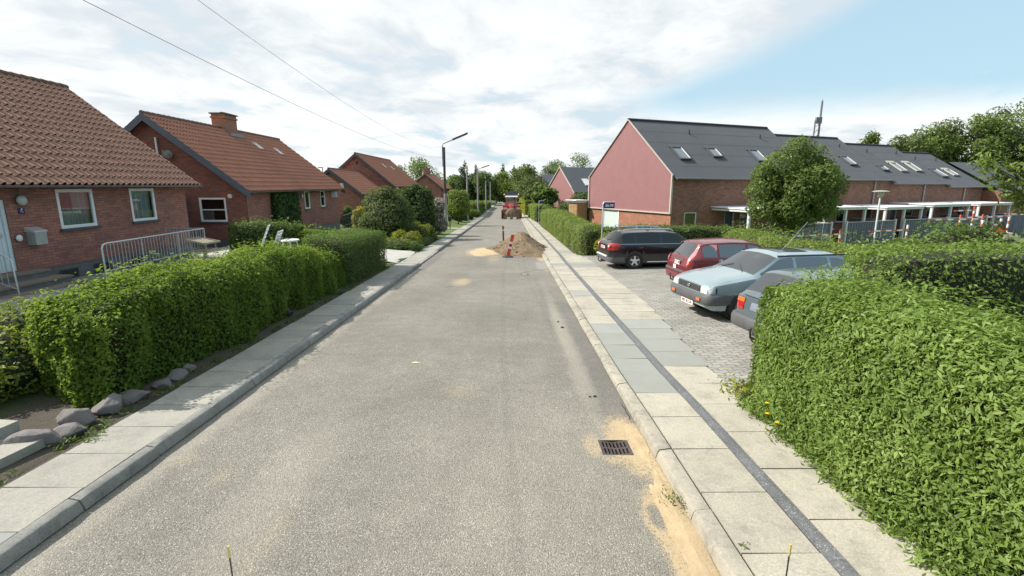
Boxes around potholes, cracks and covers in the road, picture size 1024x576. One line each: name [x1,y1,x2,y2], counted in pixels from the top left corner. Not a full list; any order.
drain grate [598,440,634,455]
